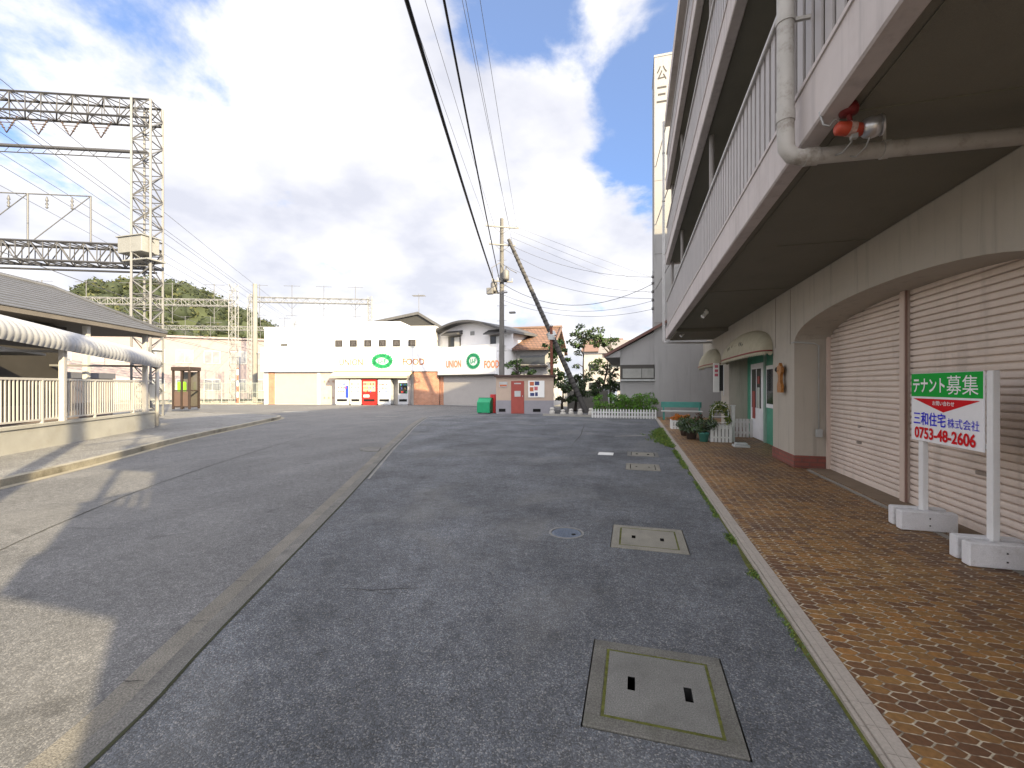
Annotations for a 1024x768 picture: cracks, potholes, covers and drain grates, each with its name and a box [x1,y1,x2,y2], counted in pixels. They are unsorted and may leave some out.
manhole cover [611,524,690,555]
manhole cover [549,527,584,539]
manhole cover [626,463,661,471]
manhole cover [582,639,750,762]
